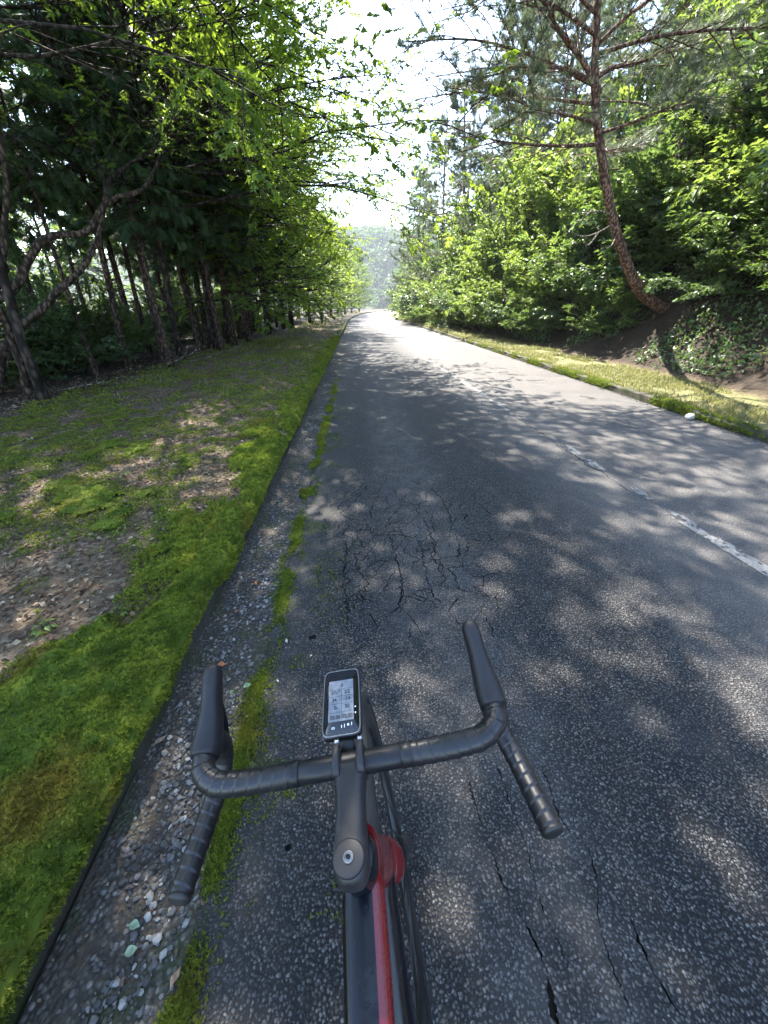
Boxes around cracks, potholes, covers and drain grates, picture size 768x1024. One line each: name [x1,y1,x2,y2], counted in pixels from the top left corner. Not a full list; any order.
crack [541,764,680,1024]
crack [317,477,524,638]
crack [462,759,569,1024]
